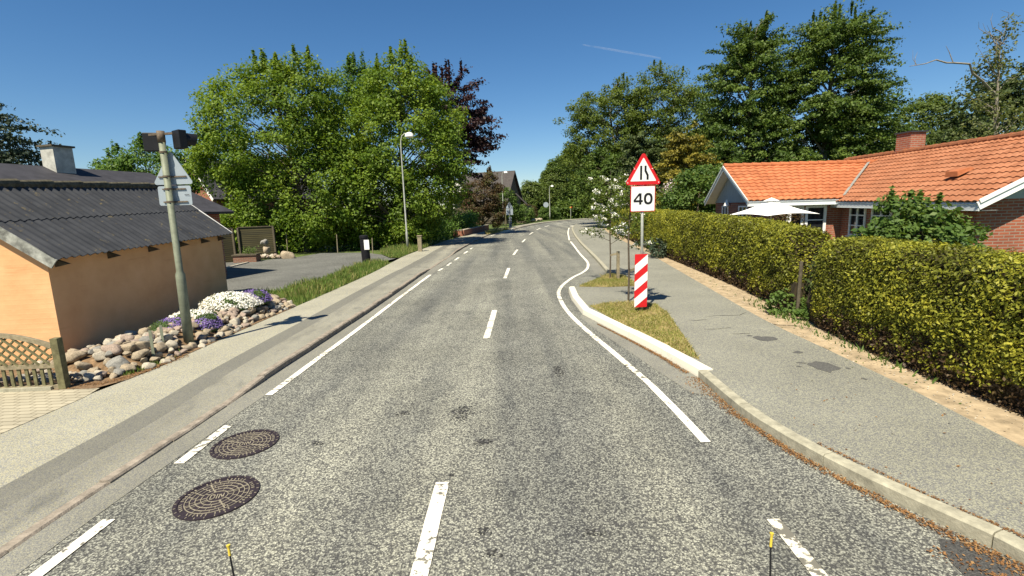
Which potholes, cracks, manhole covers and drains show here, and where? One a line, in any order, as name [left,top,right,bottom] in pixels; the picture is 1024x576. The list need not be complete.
manhole cover [172,475,260,521]
manhole cover [209,429,279,460]
